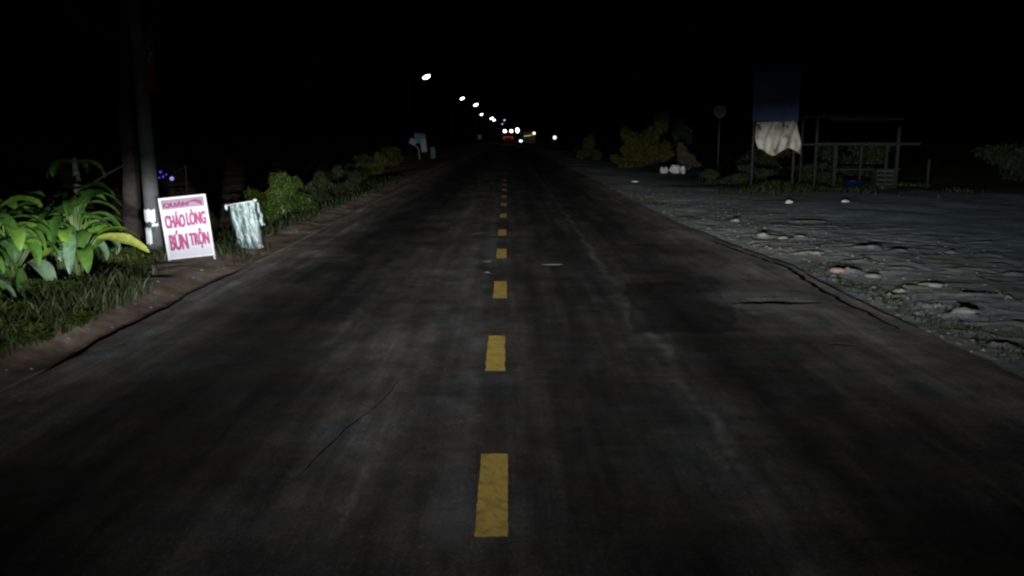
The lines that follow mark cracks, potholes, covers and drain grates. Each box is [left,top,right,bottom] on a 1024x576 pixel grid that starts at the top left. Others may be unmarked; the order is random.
crack [711,240,900,329]
crack [298,378,400,477]
